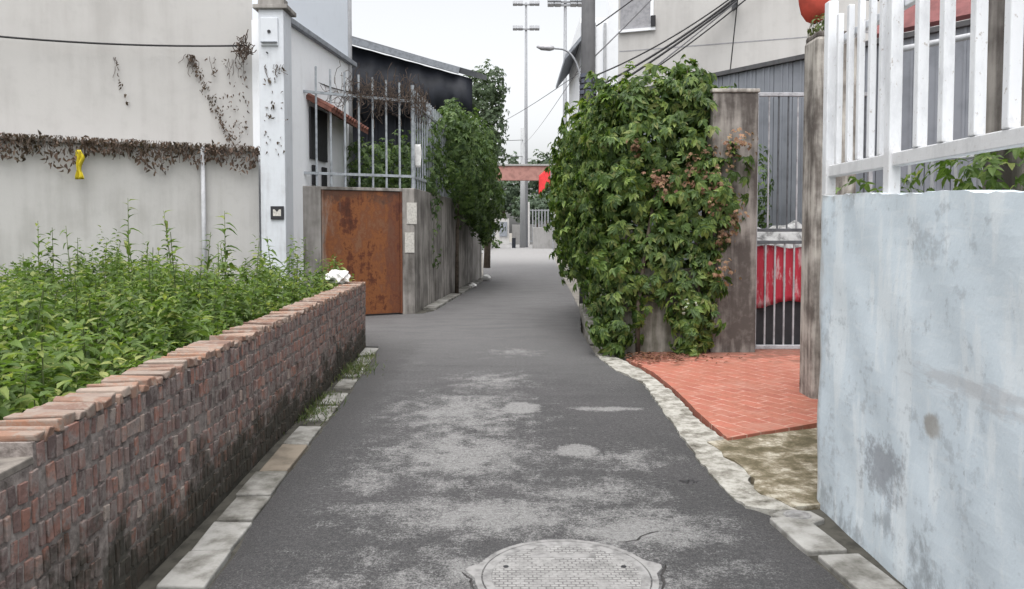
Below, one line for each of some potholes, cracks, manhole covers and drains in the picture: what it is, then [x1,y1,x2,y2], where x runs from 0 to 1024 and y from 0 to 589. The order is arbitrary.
manhole cover [464,539,662,589]
crack [624,531,659,543]
